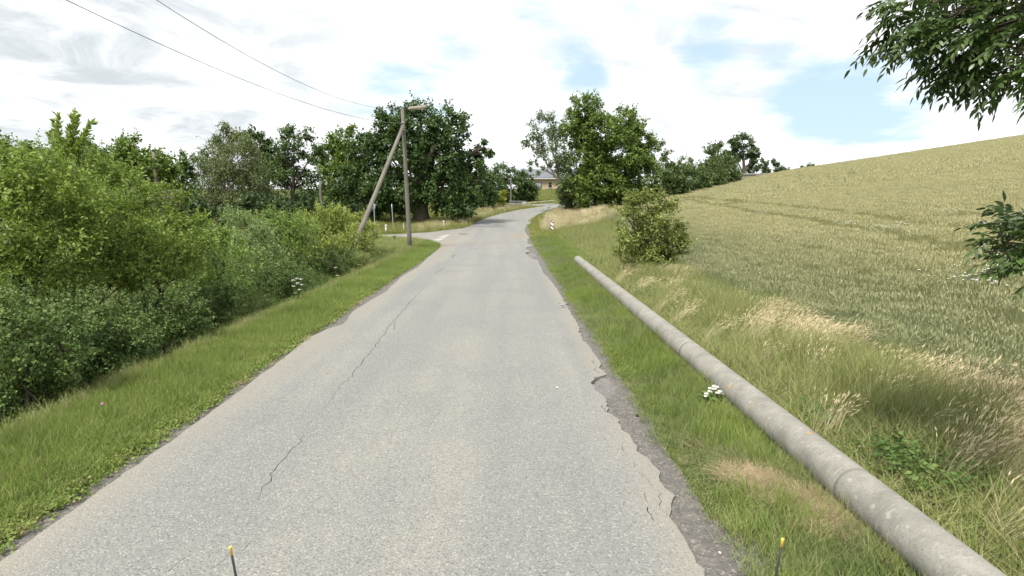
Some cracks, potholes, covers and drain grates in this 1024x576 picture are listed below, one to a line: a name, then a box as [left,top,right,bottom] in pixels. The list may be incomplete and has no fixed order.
crack [246,289,423,500]
